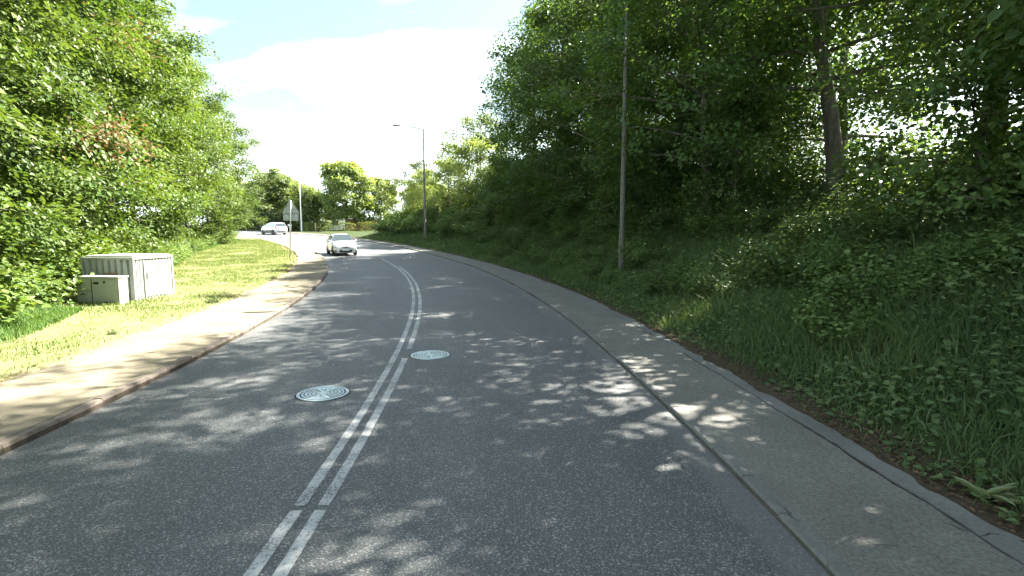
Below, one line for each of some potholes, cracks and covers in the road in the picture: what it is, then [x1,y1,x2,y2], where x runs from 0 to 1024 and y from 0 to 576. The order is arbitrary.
manhole cover [409,350,451,360]
manhole cover [294,386,351,402]
